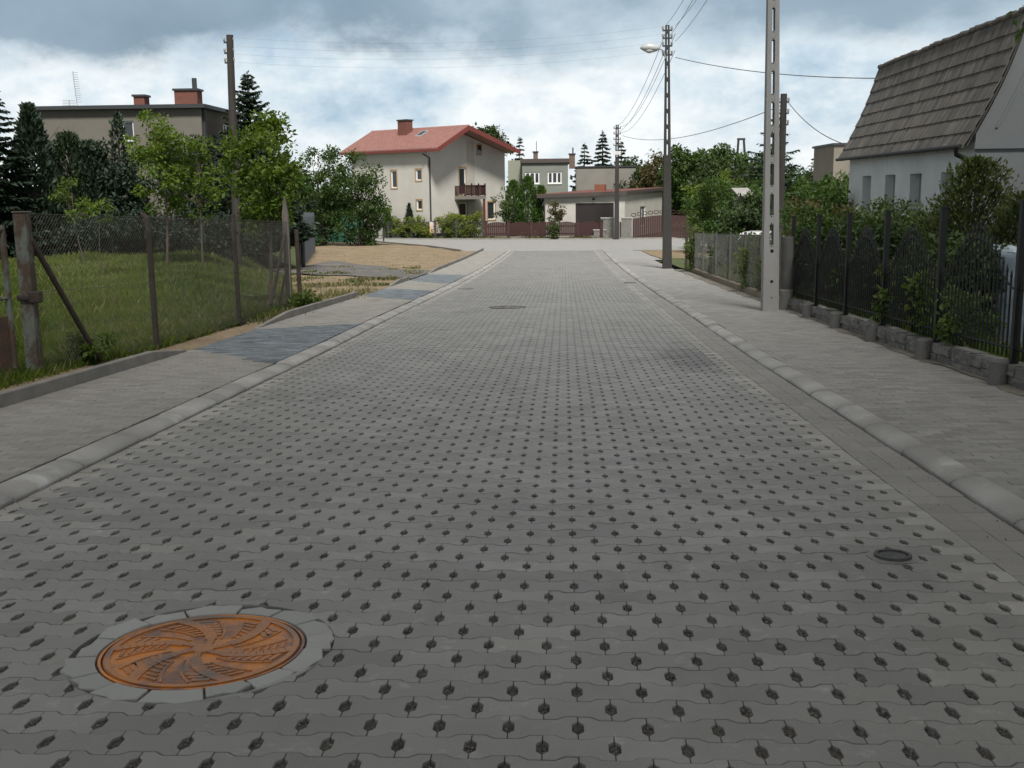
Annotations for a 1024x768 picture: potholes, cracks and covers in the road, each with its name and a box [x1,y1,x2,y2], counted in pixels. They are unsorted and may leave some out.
manhole cover [59,605,335,705]
utility cover [874,549,912,562]
